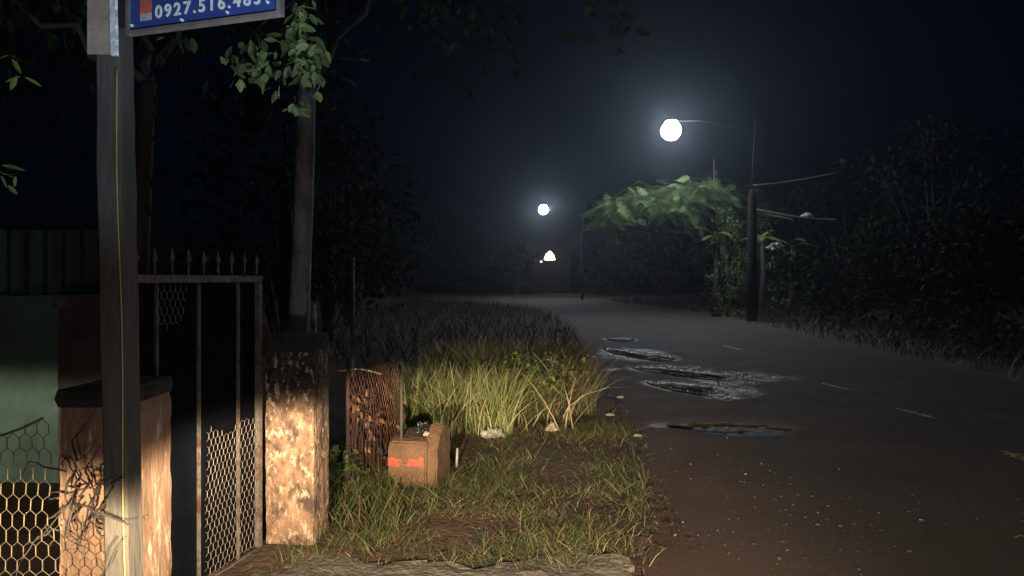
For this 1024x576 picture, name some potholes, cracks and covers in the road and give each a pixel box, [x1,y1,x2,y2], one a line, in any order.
pothole [607,350,672,362]
pothole [649,384,714,396]
pothole [667,422,793,436]
pothole [636,368,727,381]
